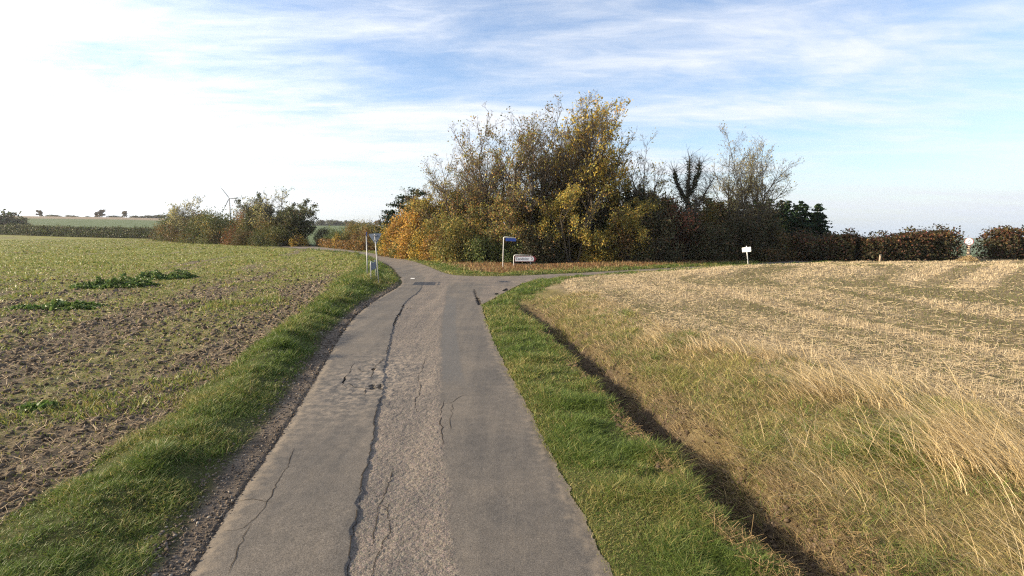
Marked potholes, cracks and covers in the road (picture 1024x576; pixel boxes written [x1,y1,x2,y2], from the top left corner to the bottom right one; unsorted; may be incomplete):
crack [342,343,404,576]
crack [226,450,294,574]
